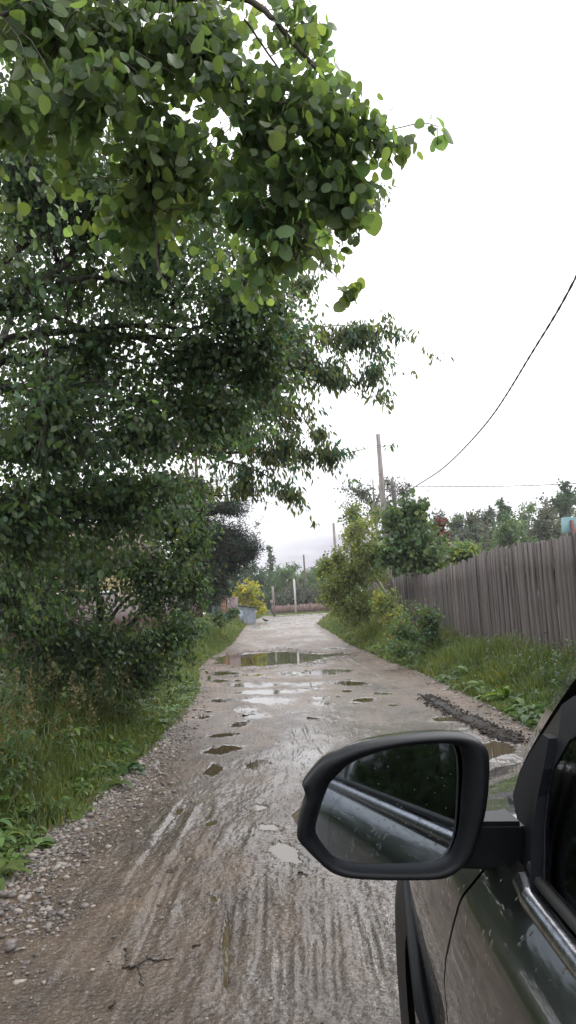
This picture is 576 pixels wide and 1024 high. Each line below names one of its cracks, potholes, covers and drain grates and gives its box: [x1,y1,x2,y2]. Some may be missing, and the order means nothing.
pothole [194,743,248,758]
pothole [261,838,308,868]
pothole [427,715,459,723]
pothole [205,649,364,669]
pothole [198,761,225,781]
pothole [239,758,275,772]
pothole [202,731,244,739]
pothole [481,737,524,762]
